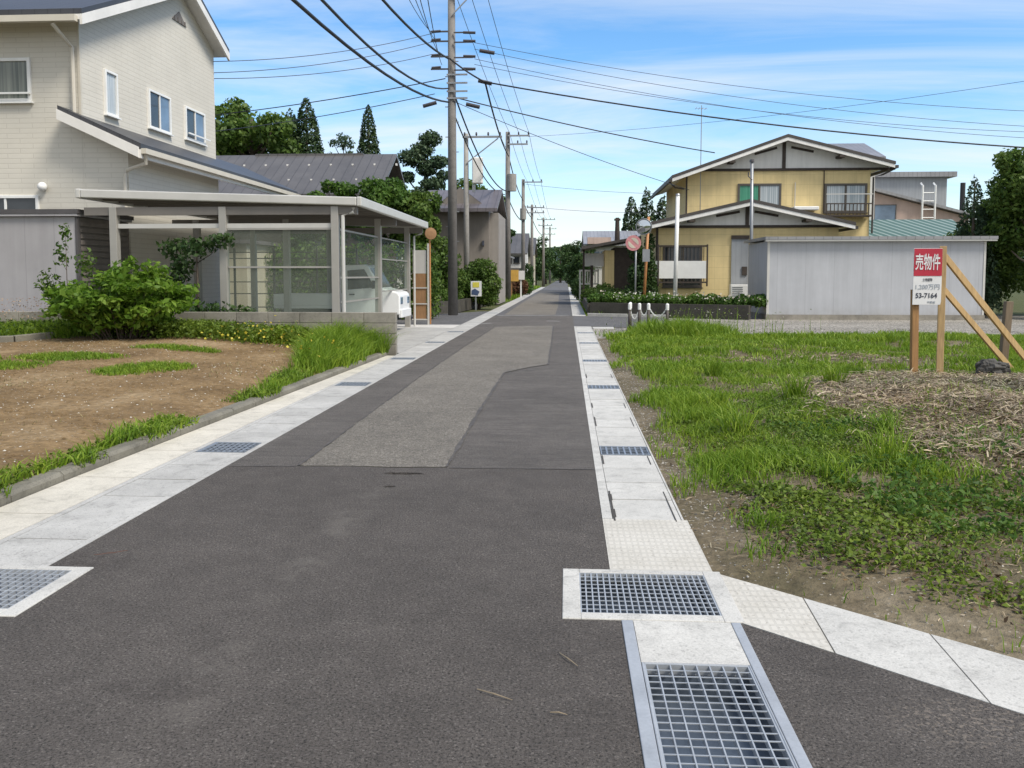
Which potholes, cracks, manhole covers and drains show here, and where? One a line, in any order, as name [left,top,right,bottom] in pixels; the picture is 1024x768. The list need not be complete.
drain grate [562,569,745,624]
drain grate [599,446,650,456]
drain grate [621,620,813,768]
drain grate [0,565,94,617]
drain grate [196,442,261,453]
